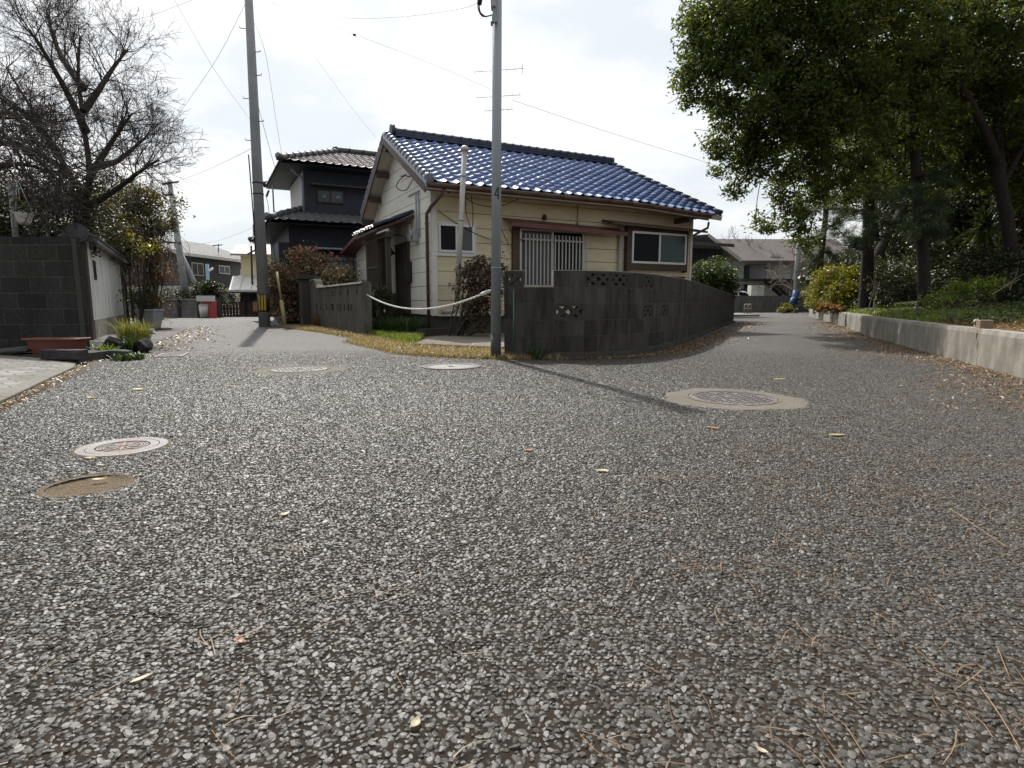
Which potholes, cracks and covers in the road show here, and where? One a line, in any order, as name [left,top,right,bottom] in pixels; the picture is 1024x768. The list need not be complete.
manhole cover [664,388,810,410]
manhole cover [252,365,348,376]
manhole cover [71,437,172,459]
